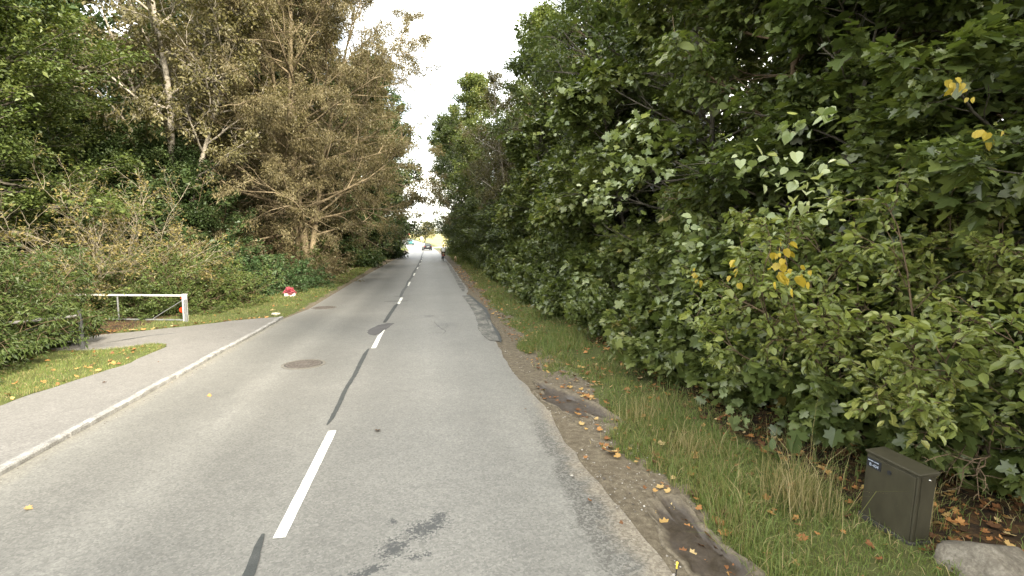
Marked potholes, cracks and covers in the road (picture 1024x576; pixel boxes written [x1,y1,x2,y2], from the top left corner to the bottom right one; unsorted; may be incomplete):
manhole cover [281,359,326,370]
